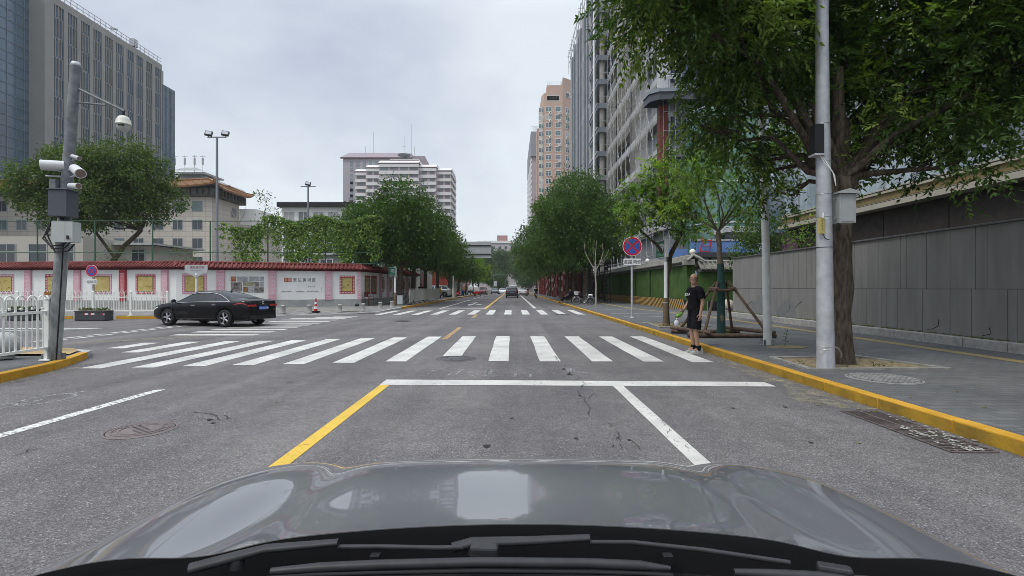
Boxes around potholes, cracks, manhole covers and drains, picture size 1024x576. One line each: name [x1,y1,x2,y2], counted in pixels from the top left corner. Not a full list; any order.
drain grate [841,410,1000,453]
manhole cover [845,372,926,385]
manhole cover [100,421,179,439]
crack [554,356,641,459]
